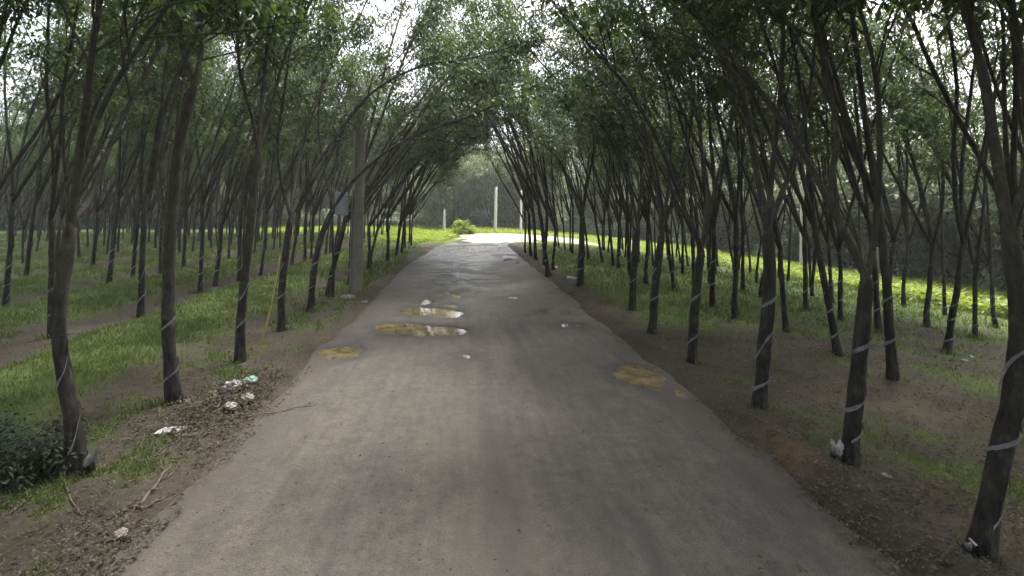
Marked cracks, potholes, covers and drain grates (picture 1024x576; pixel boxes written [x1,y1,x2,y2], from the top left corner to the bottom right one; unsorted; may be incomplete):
pothole [369,322,469,337]
pothole [608,363,680,396]
pothole [398,306,468,318]
pothole [308,345,365,361]
